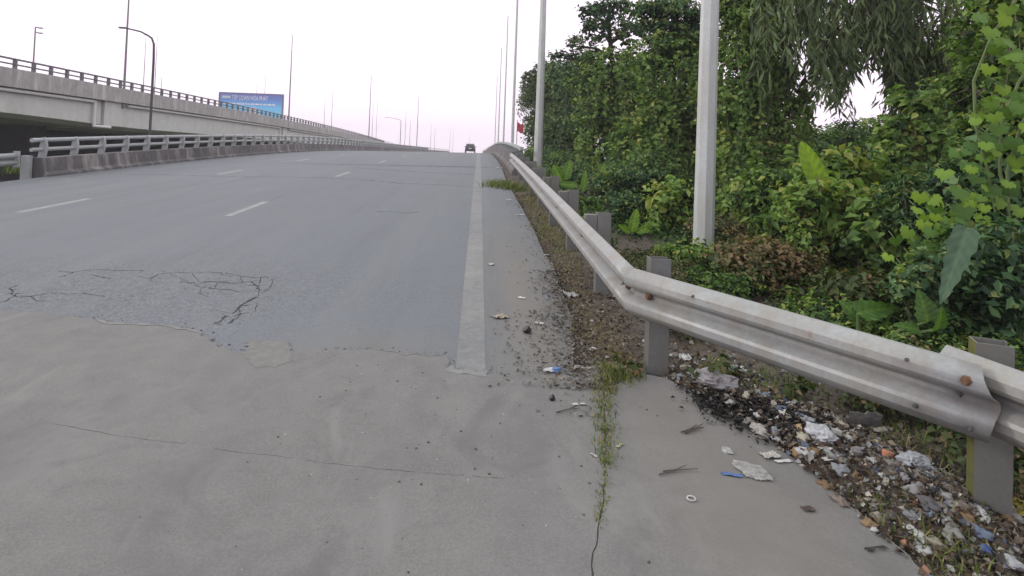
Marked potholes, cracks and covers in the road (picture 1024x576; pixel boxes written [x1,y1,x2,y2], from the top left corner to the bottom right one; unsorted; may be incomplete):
crack [4,269,144,302]
crack [57,424,492,478]
crack [138,272,273,325]
